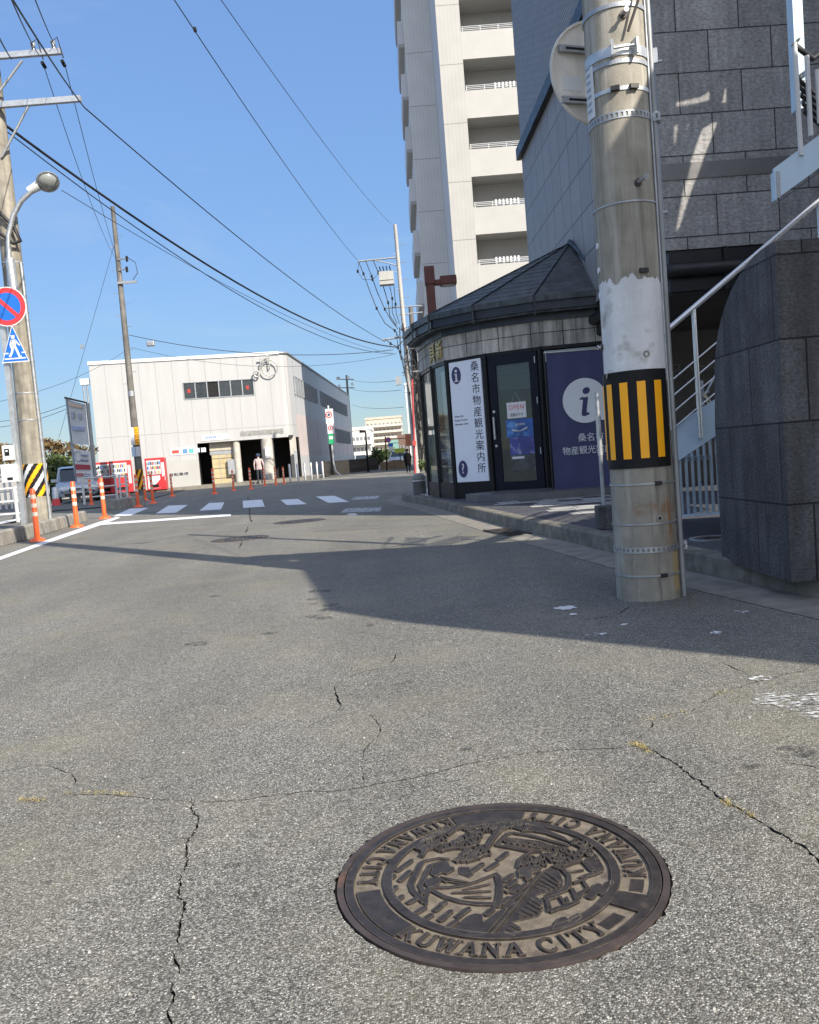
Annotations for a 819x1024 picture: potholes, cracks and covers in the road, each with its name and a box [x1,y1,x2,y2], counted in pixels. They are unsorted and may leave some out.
crack [310,654,396,726]
manhole cover [333,803,673,974]
crack [18,715,616,1024]
crack [638,664,819,863]
